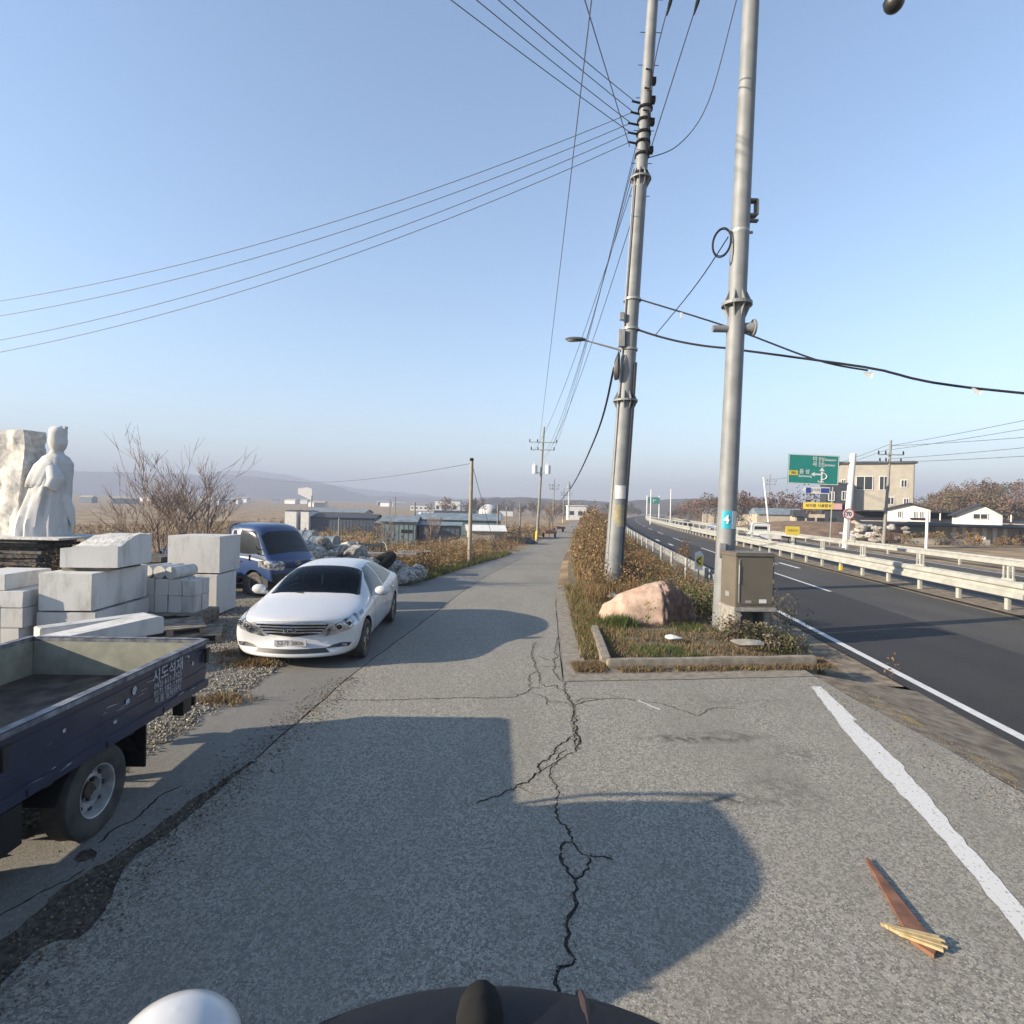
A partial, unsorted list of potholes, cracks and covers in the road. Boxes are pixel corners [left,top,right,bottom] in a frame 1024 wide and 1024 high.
crack [335,636,742,993]
crack [0,786,181,916]
